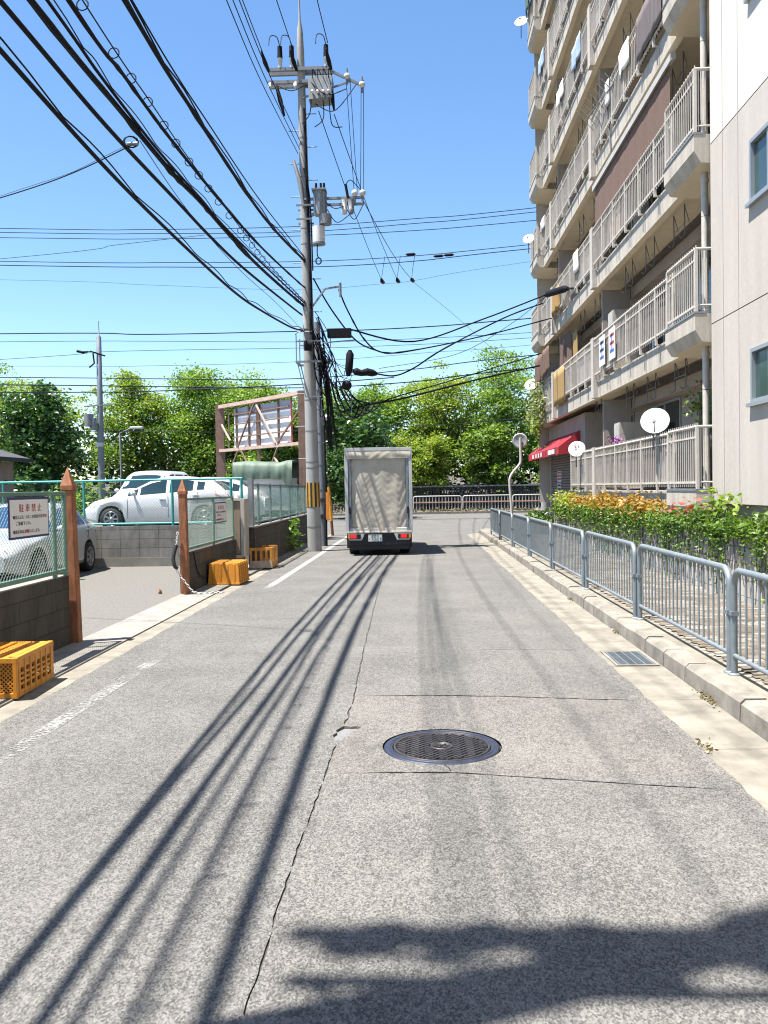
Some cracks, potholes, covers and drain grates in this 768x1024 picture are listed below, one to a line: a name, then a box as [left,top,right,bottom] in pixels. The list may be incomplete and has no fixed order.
pothole [333,726,361,741]
crack [243,572,385,1018]
manhole cover [383,730,502,765]
drain grate [600,651,660,667]
